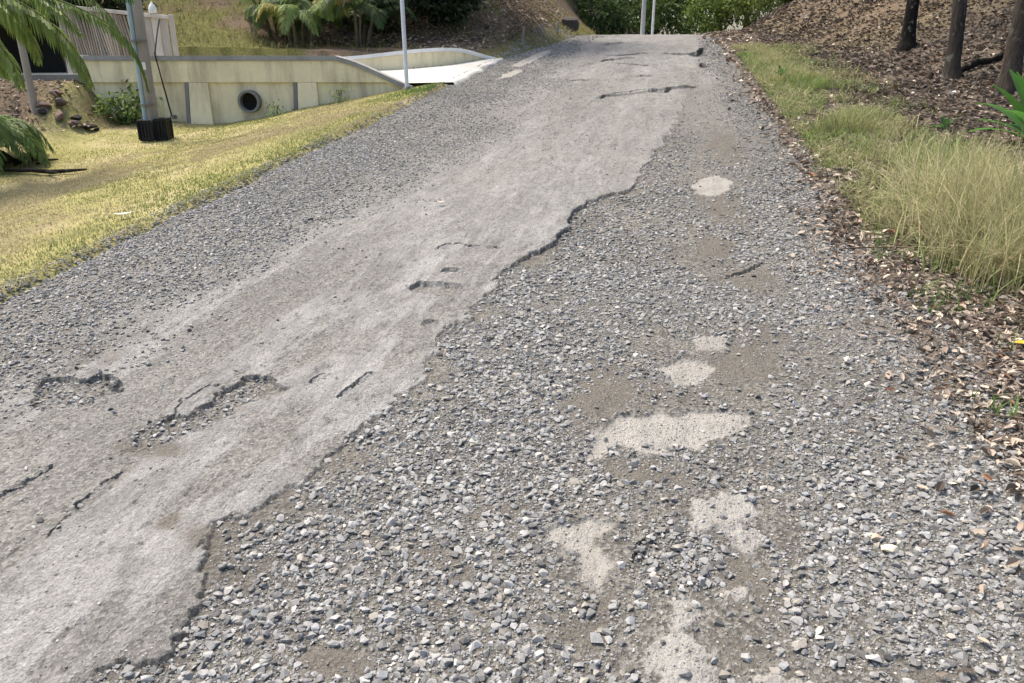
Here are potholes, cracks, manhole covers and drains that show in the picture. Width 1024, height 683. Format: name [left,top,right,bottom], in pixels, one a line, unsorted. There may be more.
pothole [23,373,124,410]
crack [46,471,123,538]
crack [0,464,54,498]
pothole [122,374,288,453]
crack [435,241,498,250]
crack [725,262,765,279]
crack [571,41,696,99]
crack [308,371,374,398]
